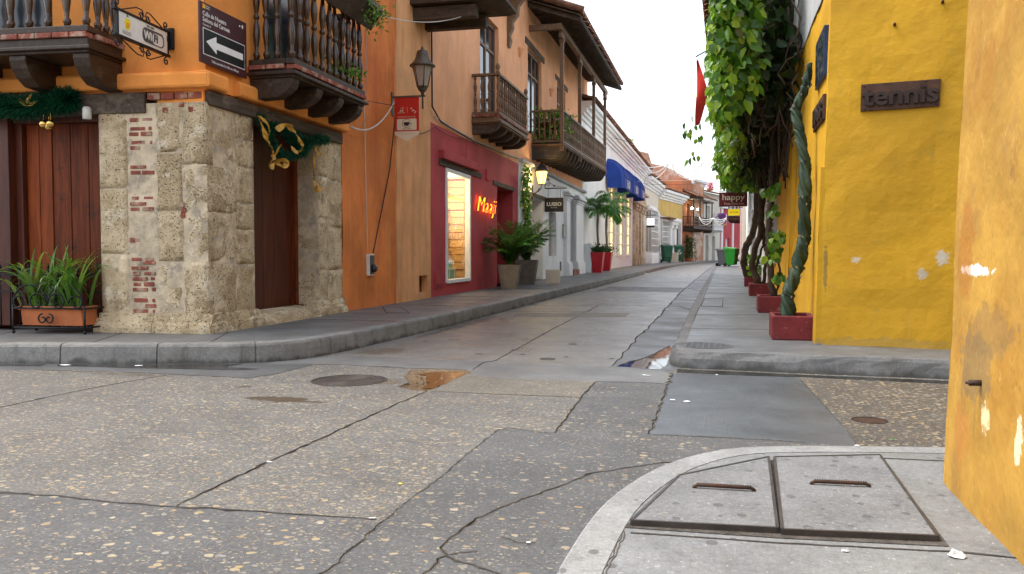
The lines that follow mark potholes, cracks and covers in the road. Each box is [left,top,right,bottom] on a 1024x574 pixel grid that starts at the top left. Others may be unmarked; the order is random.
manhole cover [310,374,388,386]
utility cover [630,456,779,534]
utility cover [773,454,940,542]
pothole [399,369,471,391]
crack [0,268,857,574]
